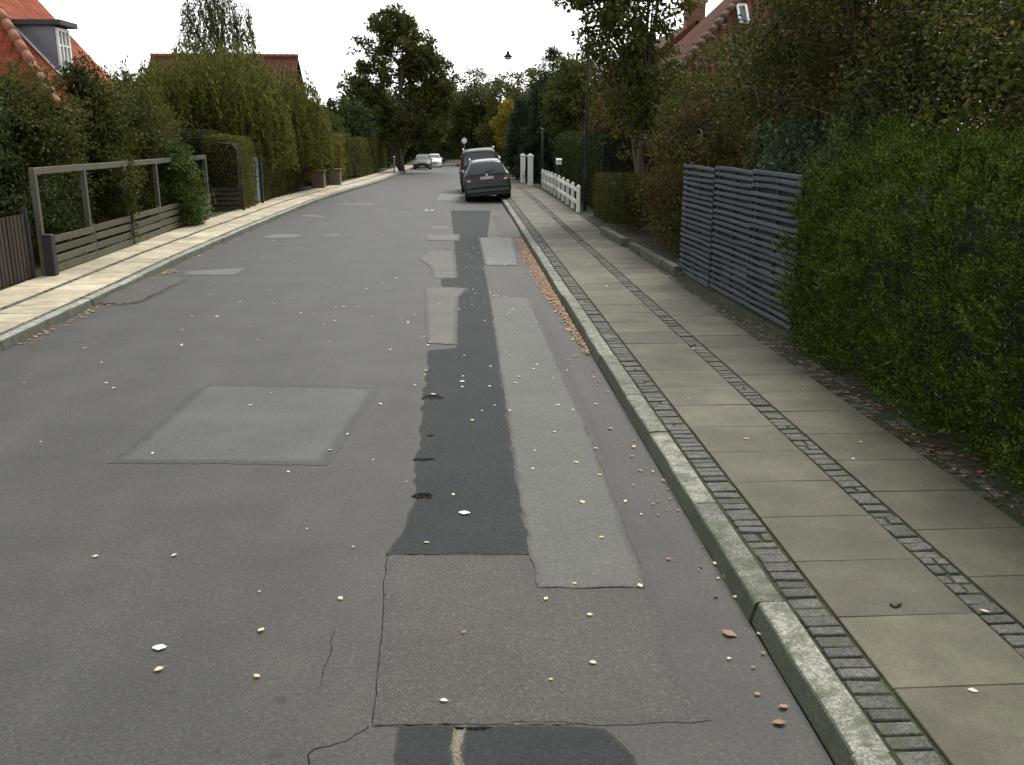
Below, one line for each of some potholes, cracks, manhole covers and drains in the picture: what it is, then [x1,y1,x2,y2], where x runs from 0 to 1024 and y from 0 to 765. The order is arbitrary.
crack [307,552,523,765]
